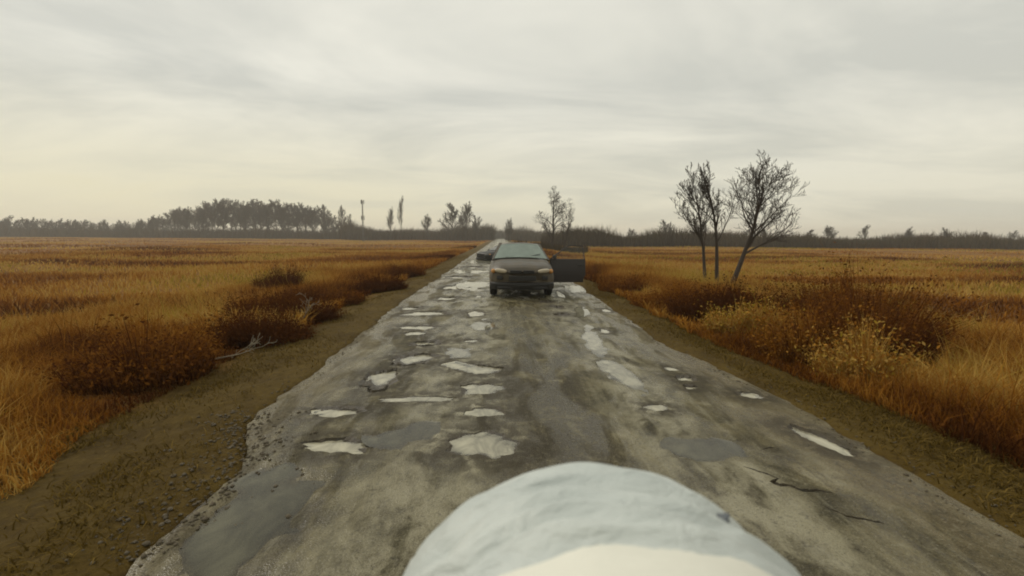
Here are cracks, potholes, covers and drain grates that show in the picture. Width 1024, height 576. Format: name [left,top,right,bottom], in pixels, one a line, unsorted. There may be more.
pothole [306,406,367,417]
pothole [440,360,504,374]
pothole [358,368,398,393]
pothole [300,436,370,454]
pothole [445,430,520,459]
crack [744,466,884,524]
pothole [463,407,506,417]
pothole [388,352,440,367]
